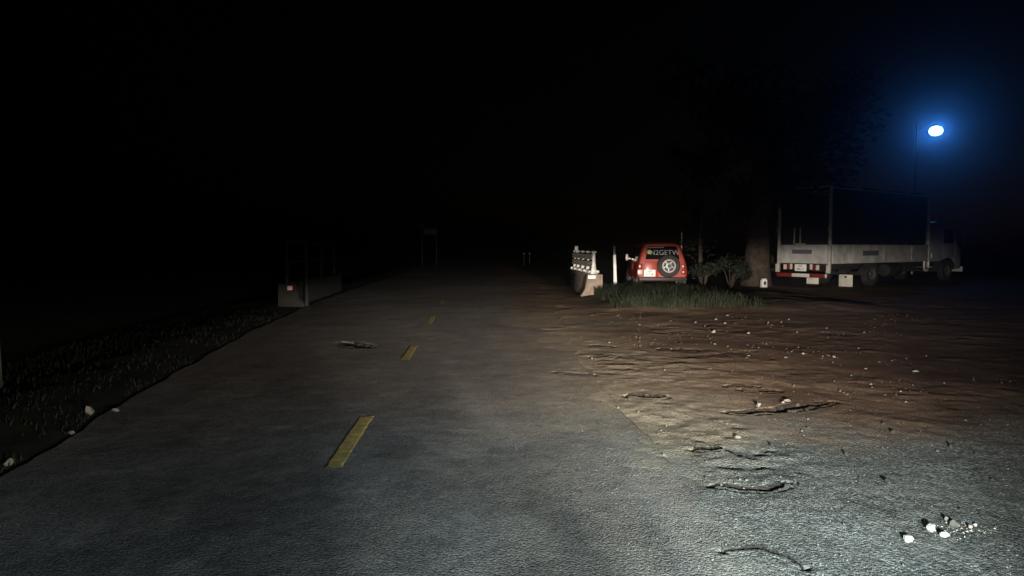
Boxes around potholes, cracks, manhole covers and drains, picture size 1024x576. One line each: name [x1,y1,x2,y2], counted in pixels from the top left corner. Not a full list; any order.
crack [556,345,622,376]
pothole [627,392,668,400]
crack [719,542,811,571]
pothole [334,341,378,349]
